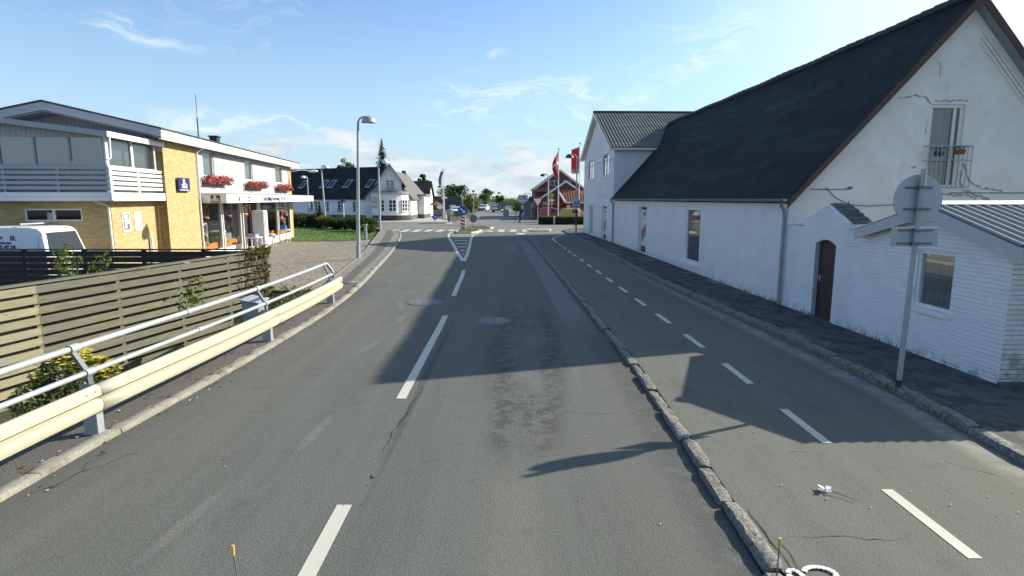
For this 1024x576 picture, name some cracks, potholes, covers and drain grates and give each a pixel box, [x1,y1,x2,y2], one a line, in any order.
manhole cover [477,317,510,325]
crack [748,510,904,576]
